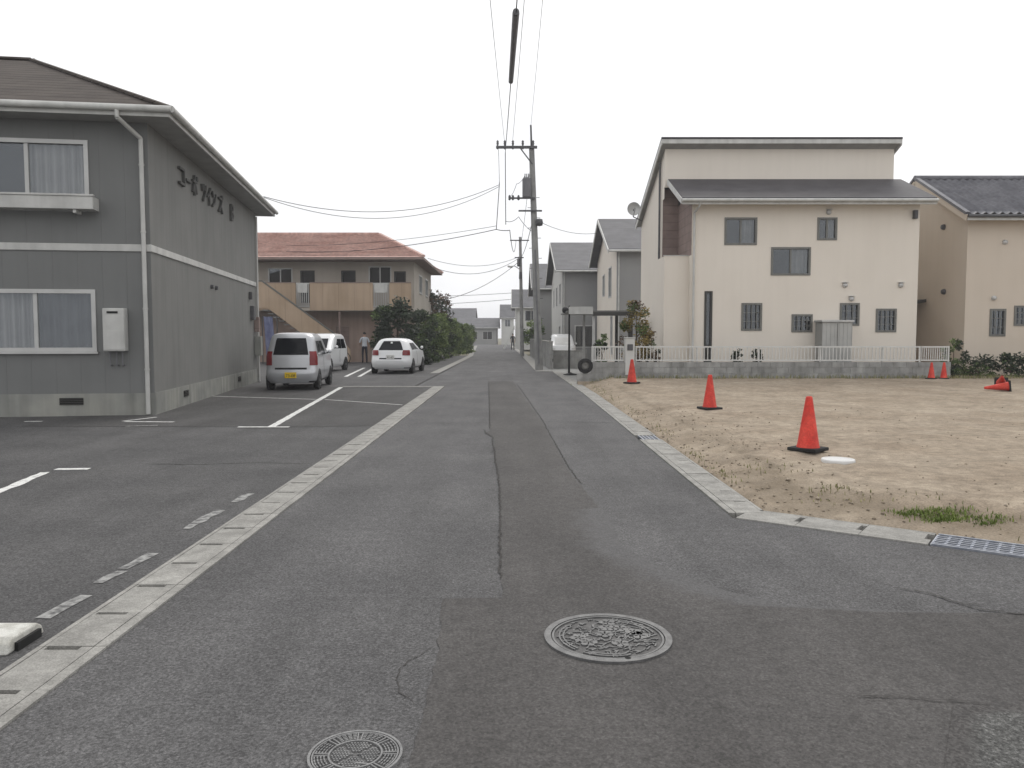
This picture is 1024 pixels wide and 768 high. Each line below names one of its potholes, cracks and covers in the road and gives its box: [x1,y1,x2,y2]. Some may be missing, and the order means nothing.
crack [396,649,428,705]
crack [896,587,1023,614]
crack [478,386,502,578]
drain grate [930,533,1024,559]
crack [857,695,990,703]
manhole cover [544,613,672,664]
manhole cover [307,730,403,768]
